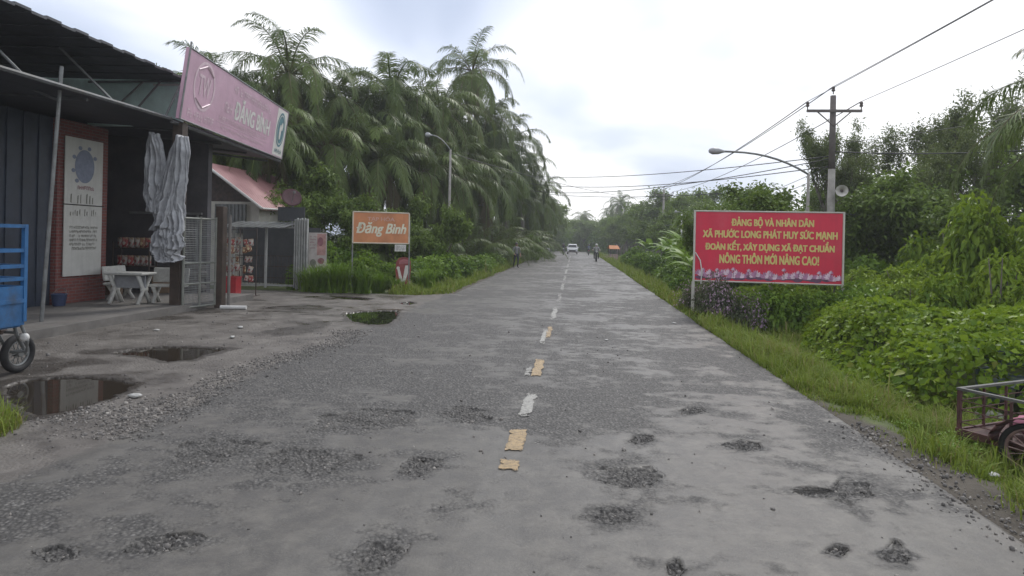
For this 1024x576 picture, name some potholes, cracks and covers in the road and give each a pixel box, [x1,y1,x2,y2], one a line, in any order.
pothole [31,545,81,563]
pothole [678,406,707,415]
pothole [791,477,877,508]
pothole [593,464,664,491]
pothole [577,506,639,525]
pothole [352,536,410,573]
pothole [107,346,231,362]
pothole [668,559,686,576]
pothole [398,456,445,477]
pothole [629,434,653,445]
pothole [119,530,209,555]
pothole [343,310,399,326]
